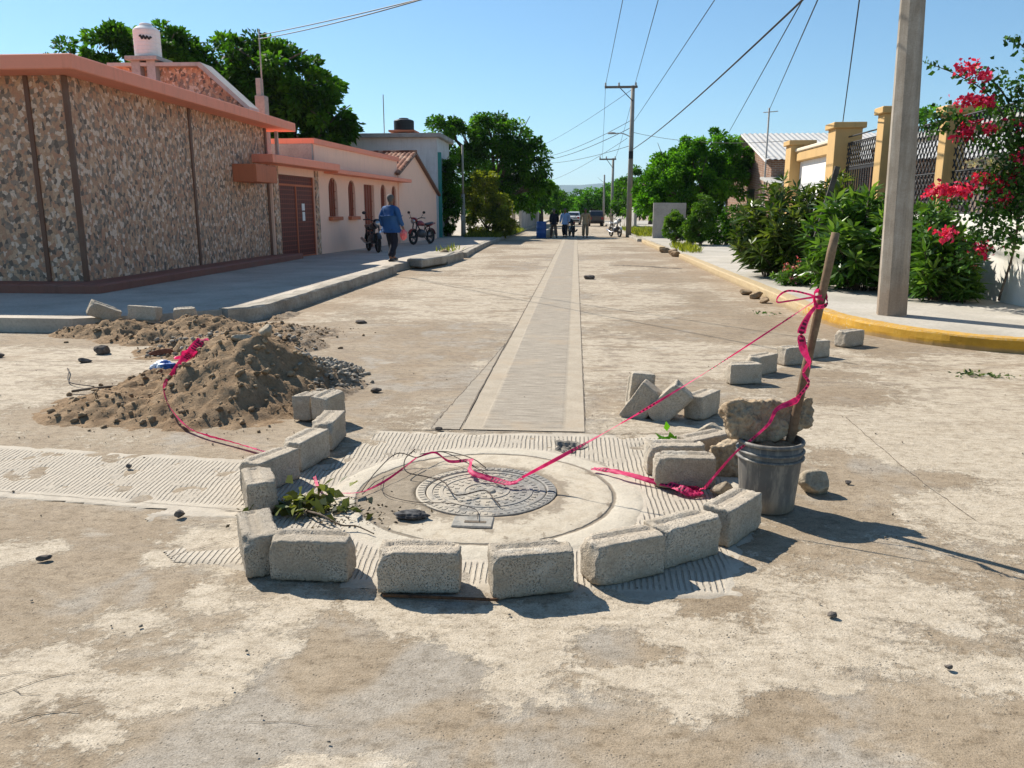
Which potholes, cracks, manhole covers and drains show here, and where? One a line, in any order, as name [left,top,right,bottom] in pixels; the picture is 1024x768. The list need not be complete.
crack [0,671,92,723]
crack [846,417,975,520]
